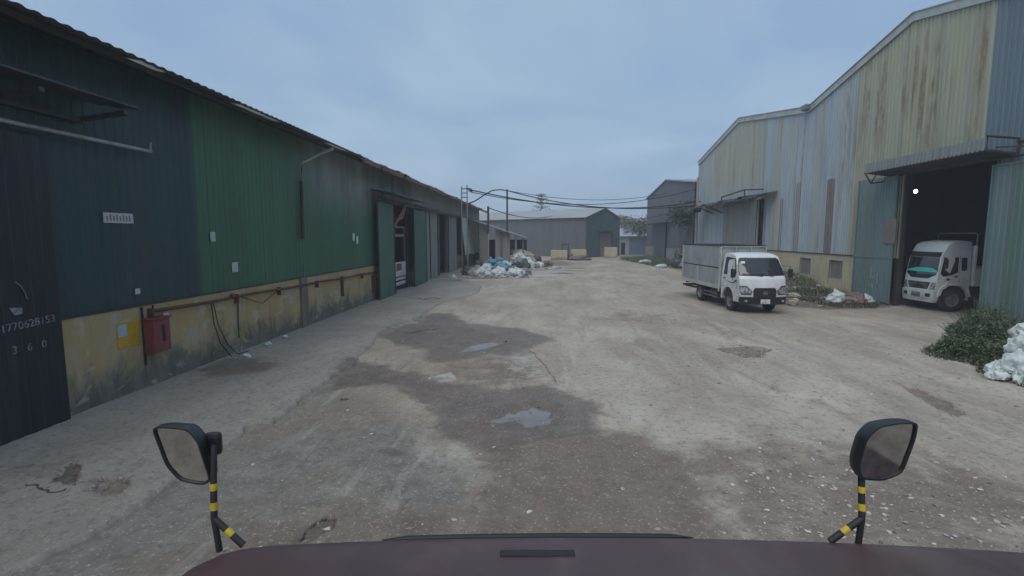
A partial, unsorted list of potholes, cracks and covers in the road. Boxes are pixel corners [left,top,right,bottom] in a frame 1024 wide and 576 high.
pothole [287,506,350,545]
pothole [42,454,87,492]
pothole [79,471,143,502]
